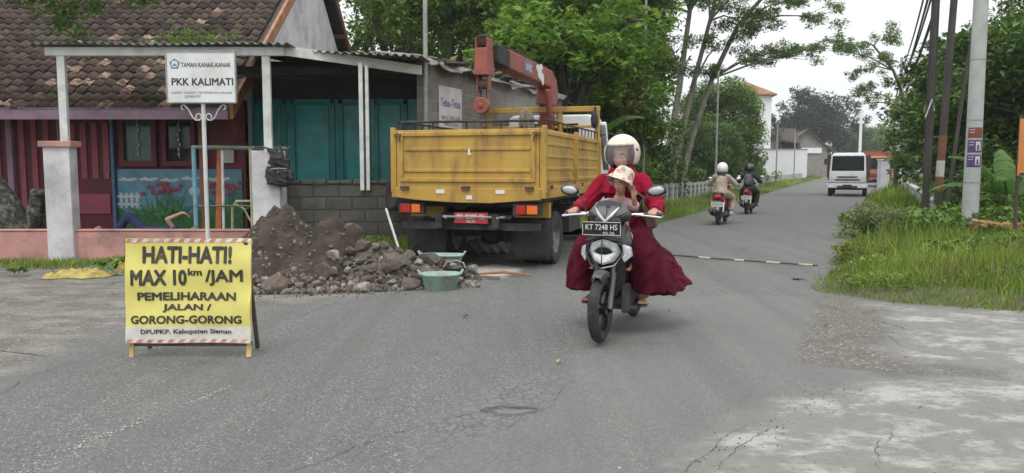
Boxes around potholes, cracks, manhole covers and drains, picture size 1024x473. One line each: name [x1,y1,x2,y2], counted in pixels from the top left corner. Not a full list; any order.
crack [684,424,783,473]
crack [430,379,573,440]
pothole [481,406,546,416]
